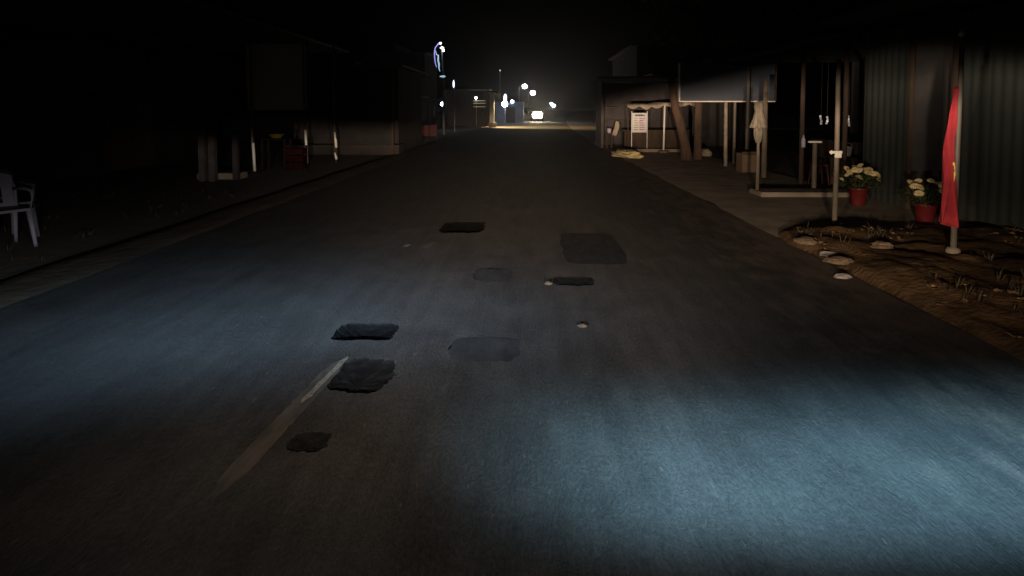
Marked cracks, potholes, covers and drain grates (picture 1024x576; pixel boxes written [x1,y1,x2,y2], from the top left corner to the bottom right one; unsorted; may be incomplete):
pothole [327,357,397,394]
pothole [286,431,332,453]
pothole [552,276,594,286]
pothole [331,323,399,341]
